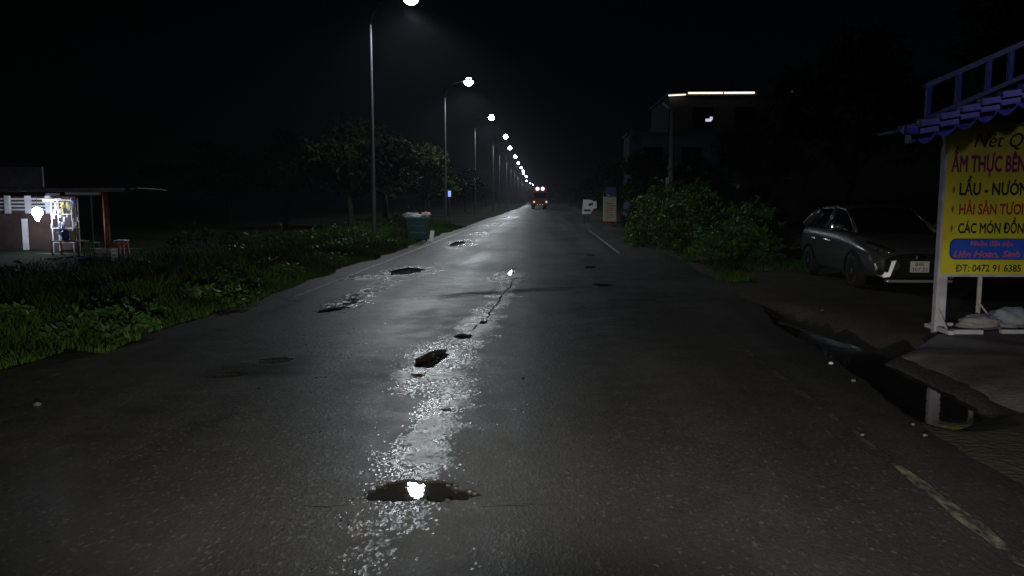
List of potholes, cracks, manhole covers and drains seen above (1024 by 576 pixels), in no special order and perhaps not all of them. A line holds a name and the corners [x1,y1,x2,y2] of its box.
crack [454,277,586,333]
pothole [413,349,449,369]
pothole [361,479,482,502]
